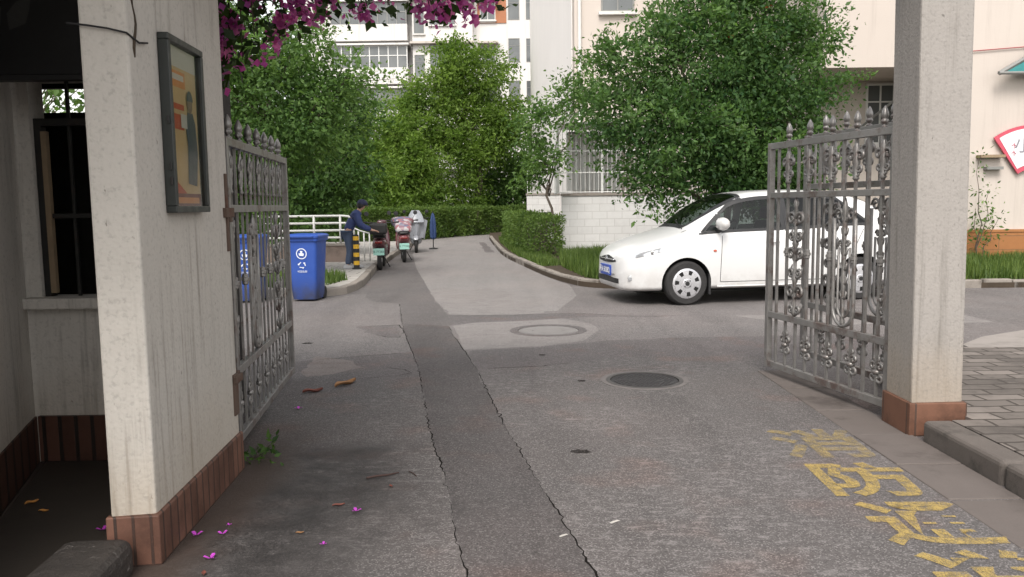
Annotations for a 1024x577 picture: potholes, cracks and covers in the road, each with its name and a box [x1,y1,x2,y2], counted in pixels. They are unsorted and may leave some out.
crack [312,304,468,577]
manhole cover [510,324,587,336]
manhole cover [601,371,689,390]
crack [449,327,599,577]
